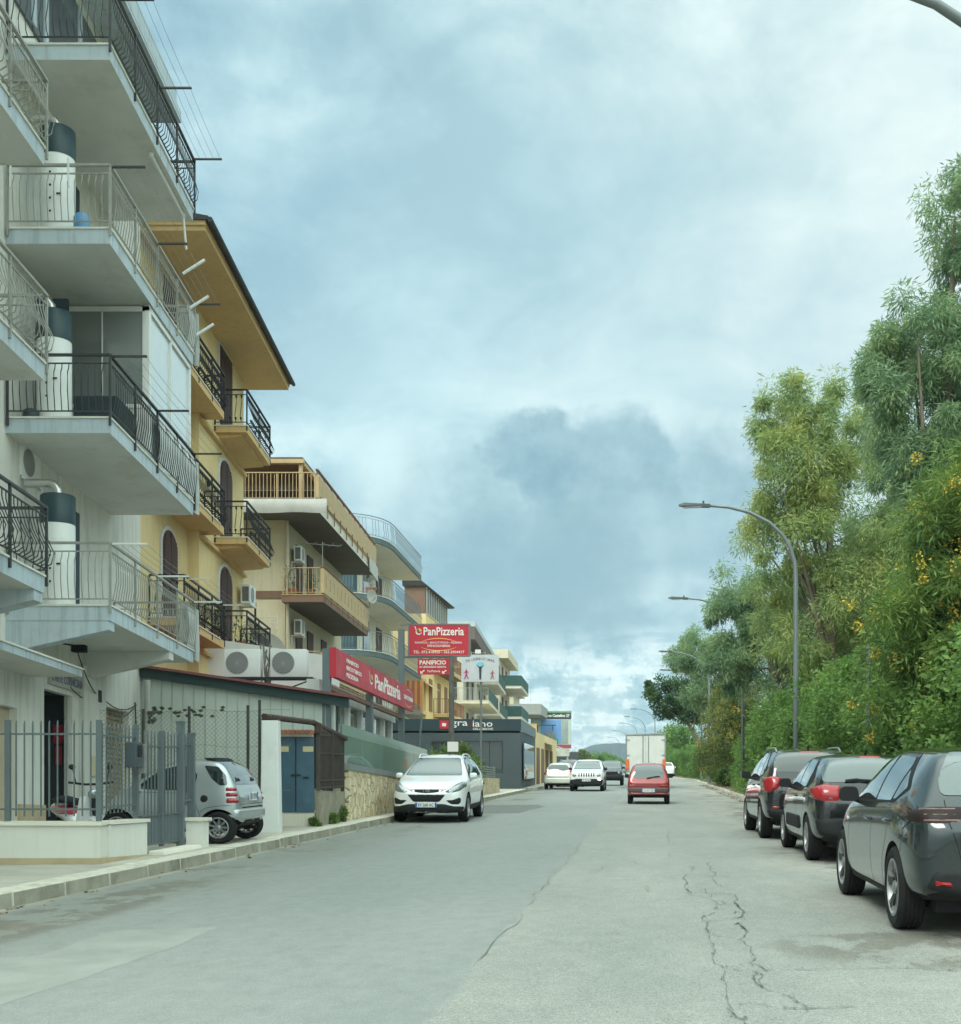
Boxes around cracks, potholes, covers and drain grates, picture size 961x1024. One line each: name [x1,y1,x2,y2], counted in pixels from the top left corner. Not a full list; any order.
crack [476,854,572,962]
crack [683,860,951,1024]
